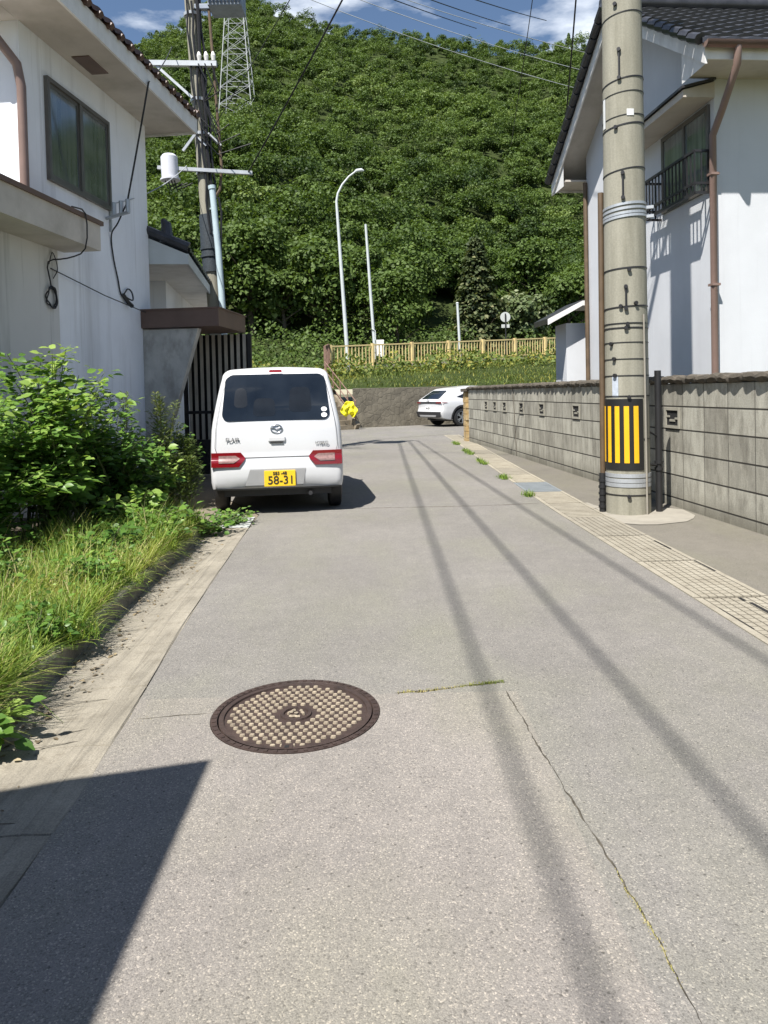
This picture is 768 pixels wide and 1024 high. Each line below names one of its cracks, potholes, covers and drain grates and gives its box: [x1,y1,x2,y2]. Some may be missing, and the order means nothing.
drain grate [513,482,562,492]
manhole cover [210,680,380,754]
crack [398,679,702,1024]
